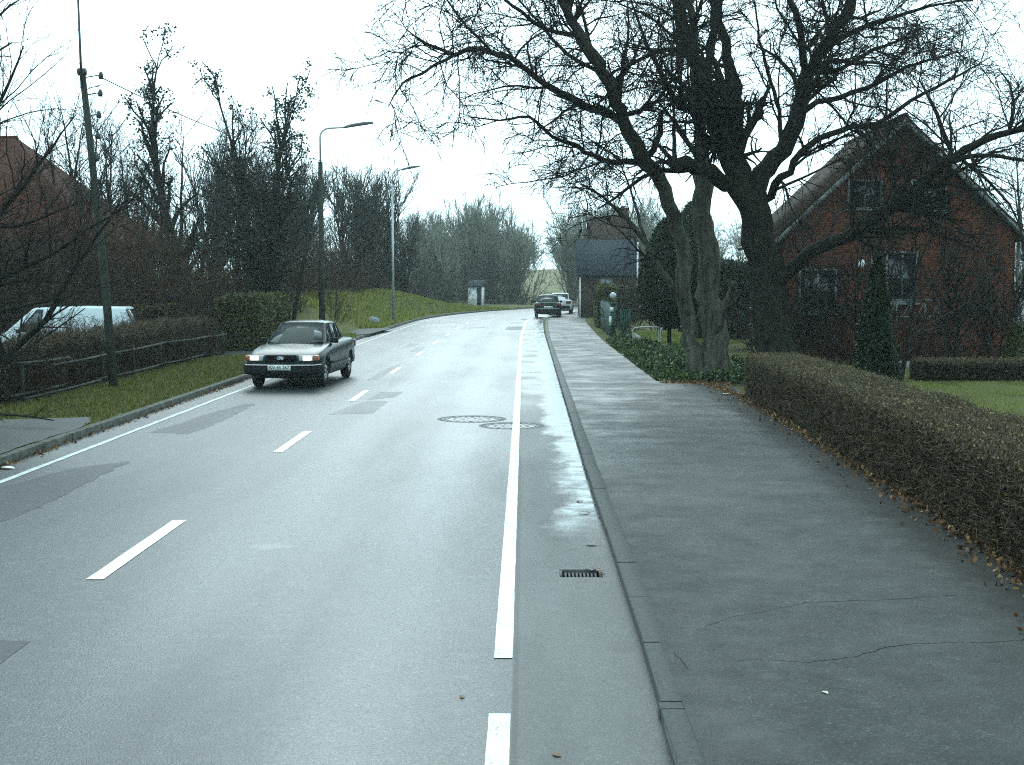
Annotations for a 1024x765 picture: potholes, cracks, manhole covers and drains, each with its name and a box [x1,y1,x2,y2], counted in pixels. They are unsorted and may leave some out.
manhole cover [437,415,506,424]
crack [735,639,1024,663]
crack [704,595,950,628]
